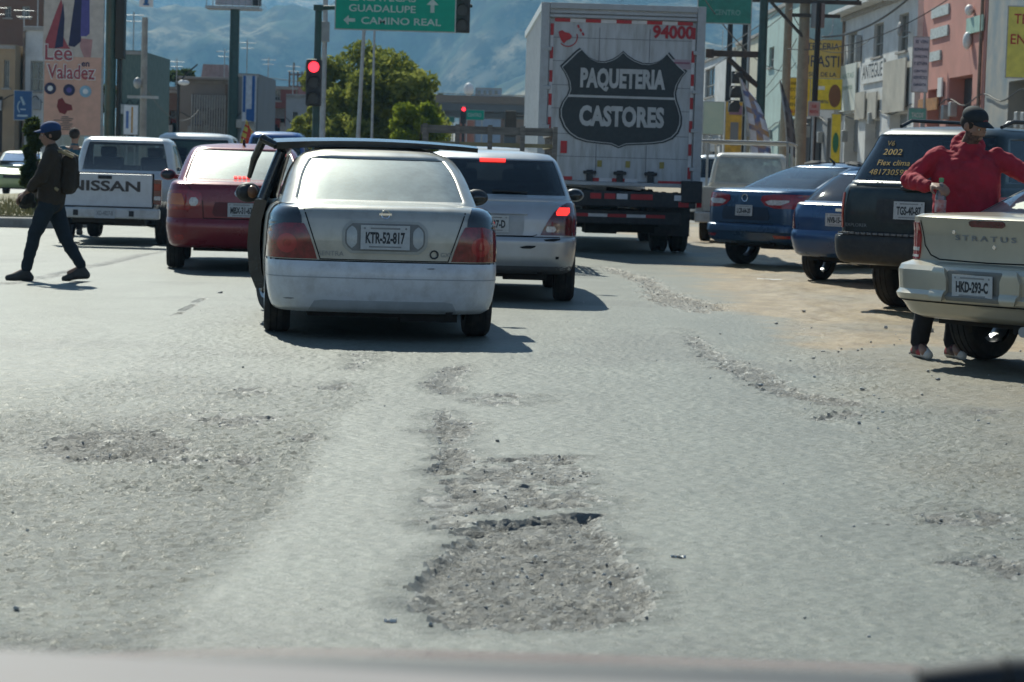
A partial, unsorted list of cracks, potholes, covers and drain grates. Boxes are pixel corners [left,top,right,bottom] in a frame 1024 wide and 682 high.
pothole [37,429,192,464]
pothole [409,454,616,532]
pothole [148,446,225,465]
pothole [415,366,472,395]
pothole [397,512,662,633]
pothole [465,393,530,406]
pothole [423,446,480,477]
pothole [223,453,262,467]
